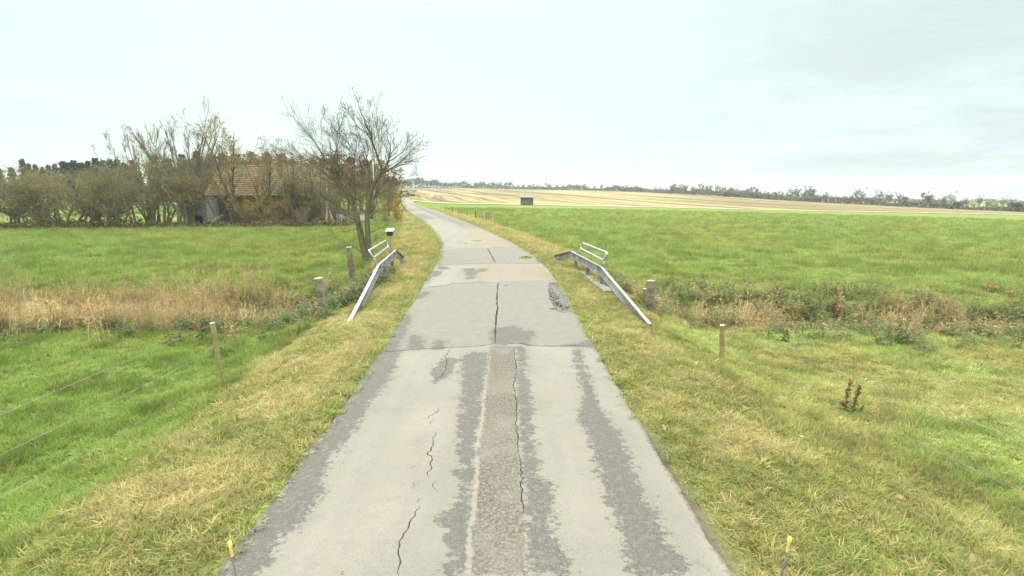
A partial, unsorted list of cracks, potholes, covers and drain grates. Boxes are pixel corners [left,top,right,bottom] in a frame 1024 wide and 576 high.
crack [385,283,580,517]
pothole [548,282,572,313]
crack [397,409,439,576]
